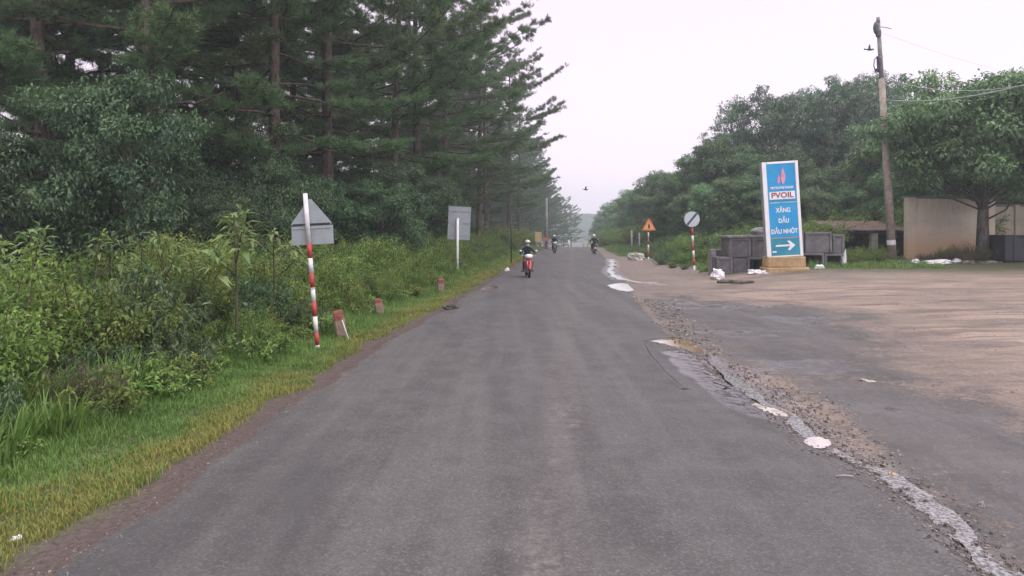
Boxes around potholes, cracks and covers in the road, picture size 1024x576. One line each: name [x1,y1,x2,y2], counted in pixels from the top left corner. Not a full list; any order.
pothole [639,336,708,356]
pothole [788,435,842,453]
pothole [605,283,635,292]
pothole [741,399,800,421]
crack [640,344,733,389]
